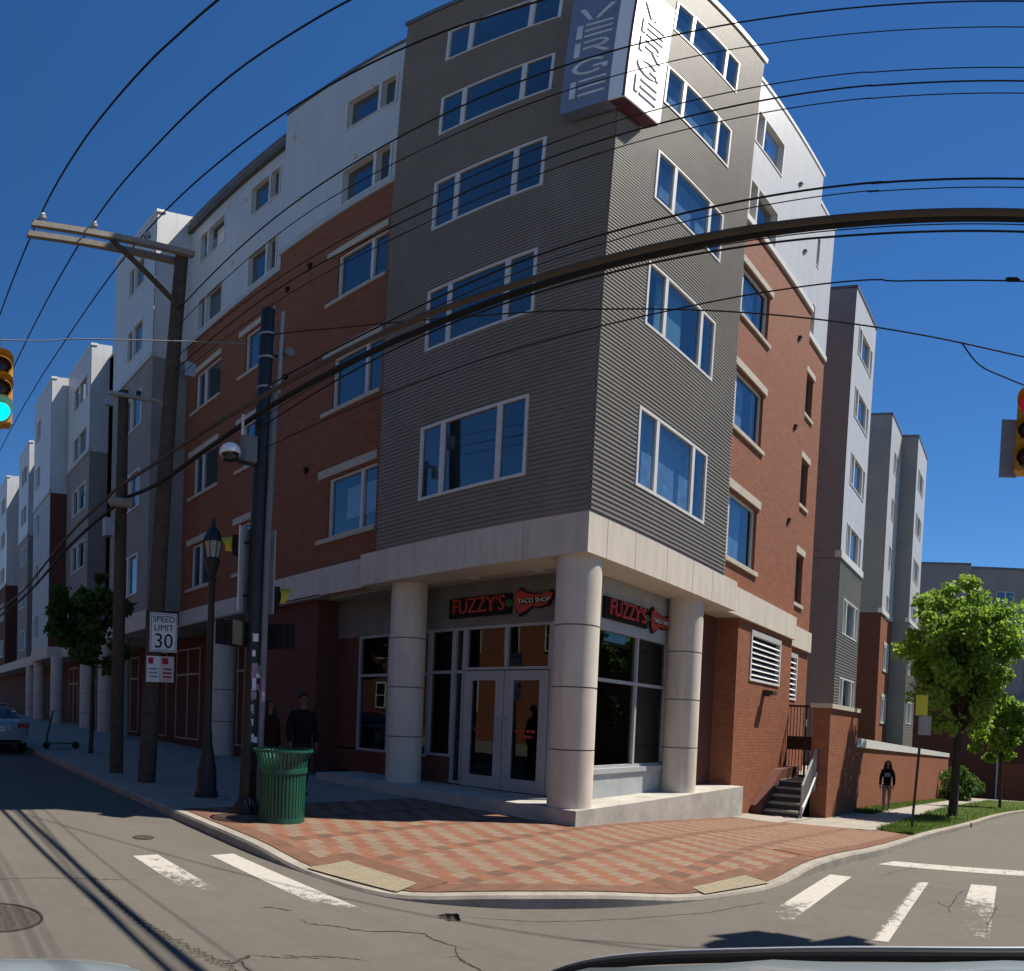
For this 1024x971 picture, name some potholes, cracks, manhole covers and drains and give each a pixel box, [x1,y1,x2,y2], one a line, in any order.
crack [305,921,482,971]
manhole cover [0,903,43,933]
pothole [436,913,461,922]
crack [225,954,365,971]
